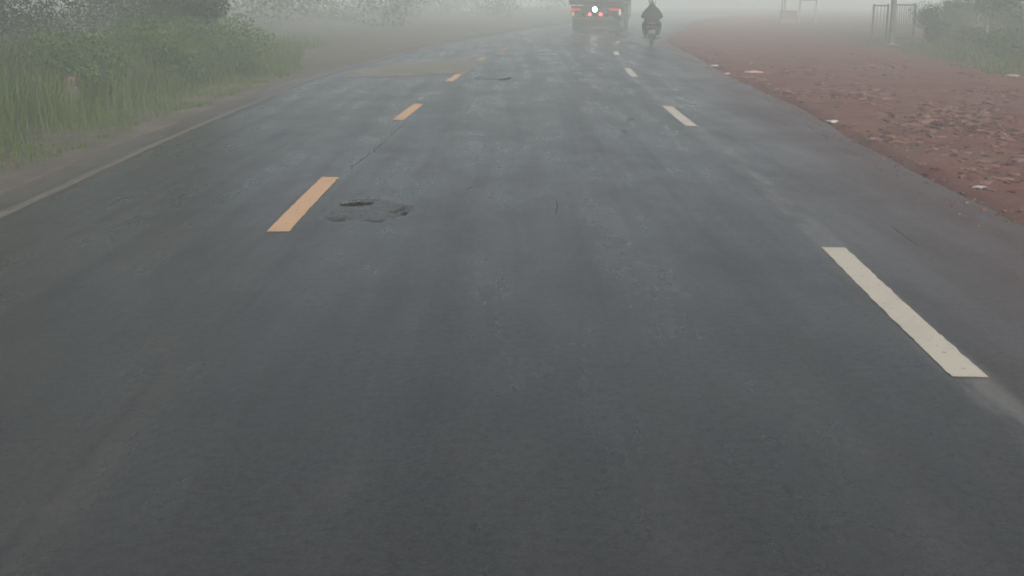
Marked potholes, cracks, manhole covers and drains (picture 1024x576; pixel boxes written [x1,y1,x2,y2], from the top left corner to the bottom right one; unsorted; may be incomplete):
pothole [319,198,418,224]
